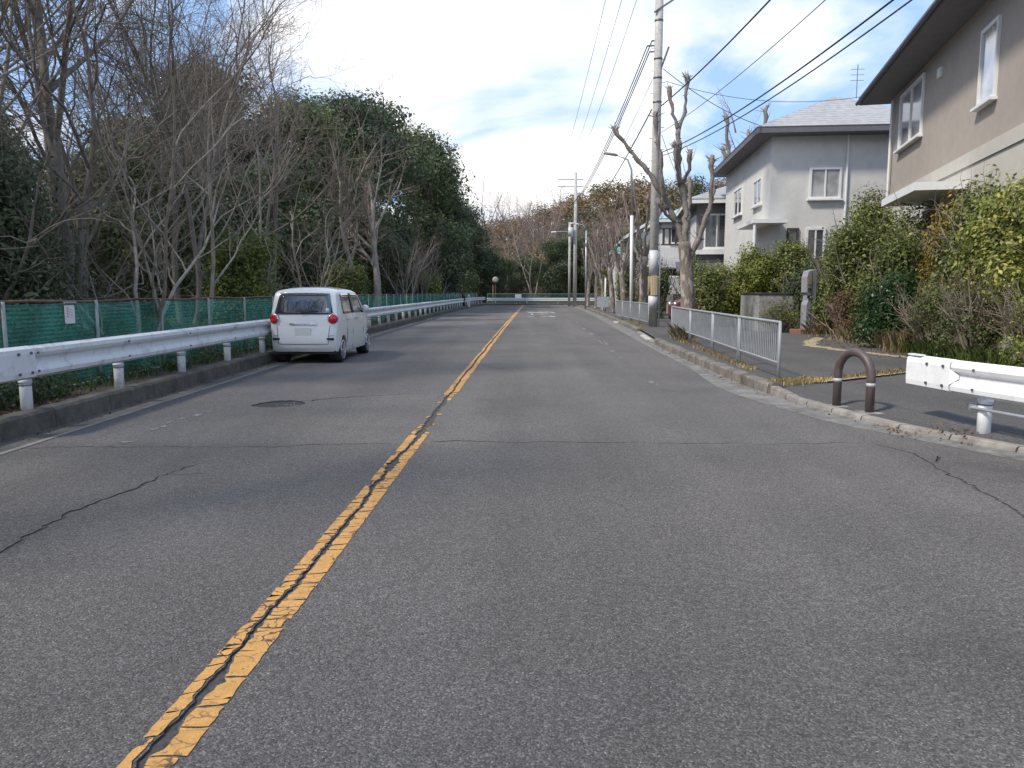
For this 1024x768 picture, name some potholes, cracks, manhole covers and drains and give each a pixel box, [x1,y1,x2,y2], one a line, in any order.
crack [877,444,1024,518]
